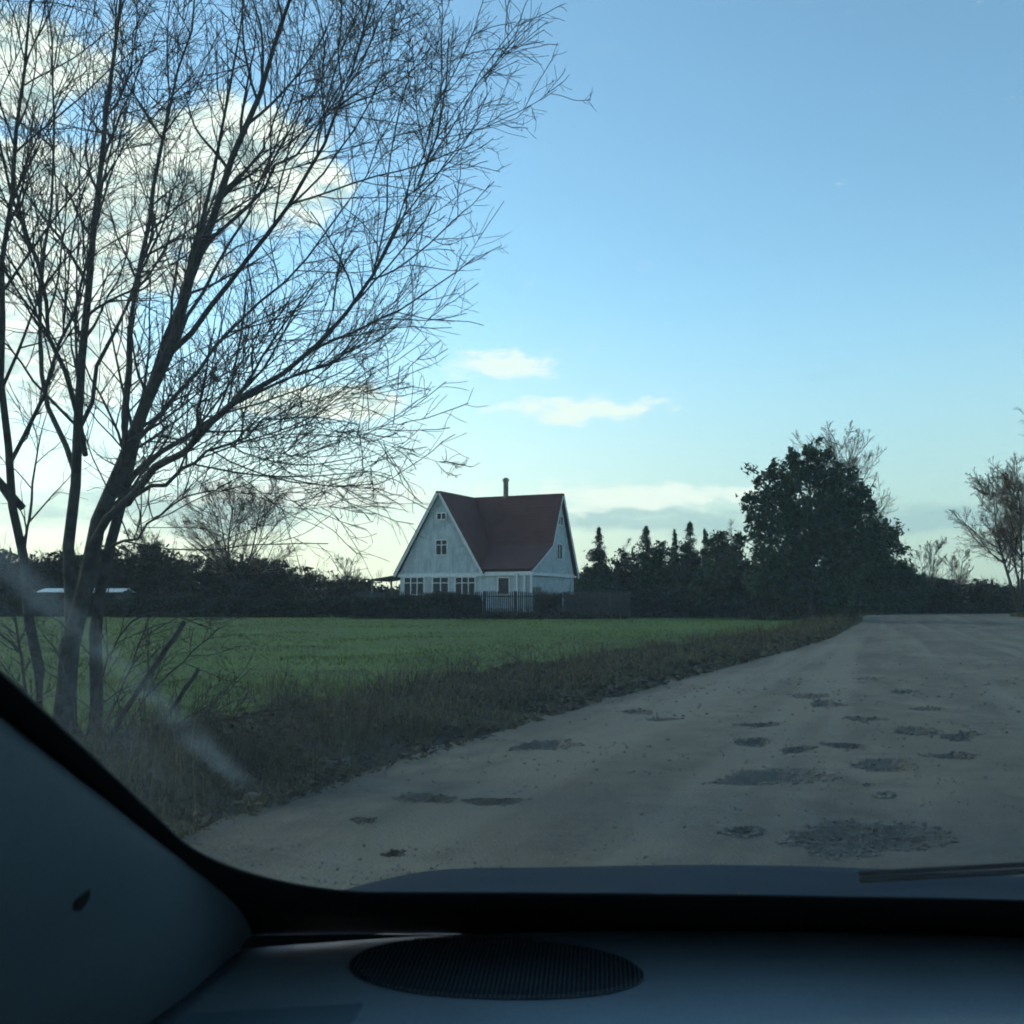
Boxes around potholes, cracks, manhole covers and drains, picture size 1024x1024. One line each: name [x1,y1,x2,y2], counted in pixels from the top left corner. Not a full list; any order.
pothole [918,752,978,760]
pothole [823,742,871,750]
pothole [890,726,946,736]
pothole [939,731,979,742]
pothole [509,739,579,751]
pothole [784,820,957,859]
pothole [392,792,455,804]
pothole [708,768,848,786]
pothole [460,797,526,806]
pothole [848,757,916,773]
pothole [733,737,772,748]
pothole [781,745,818,754]
